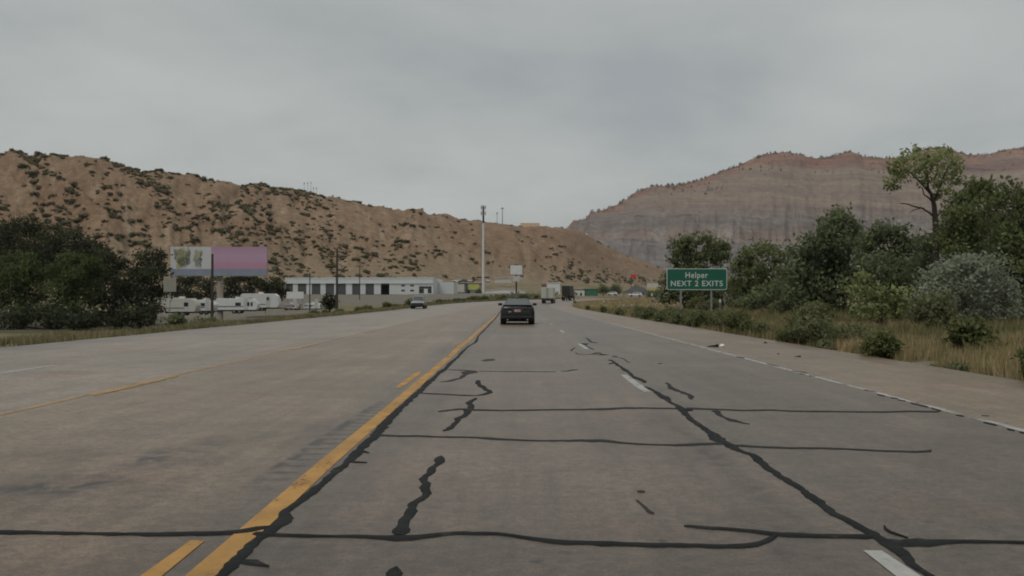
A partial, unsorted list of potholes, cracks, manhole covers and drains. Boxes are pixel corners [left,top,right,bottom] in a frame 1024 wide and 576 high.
crack [570,337,631,363]
crack [636,490,655,514]
